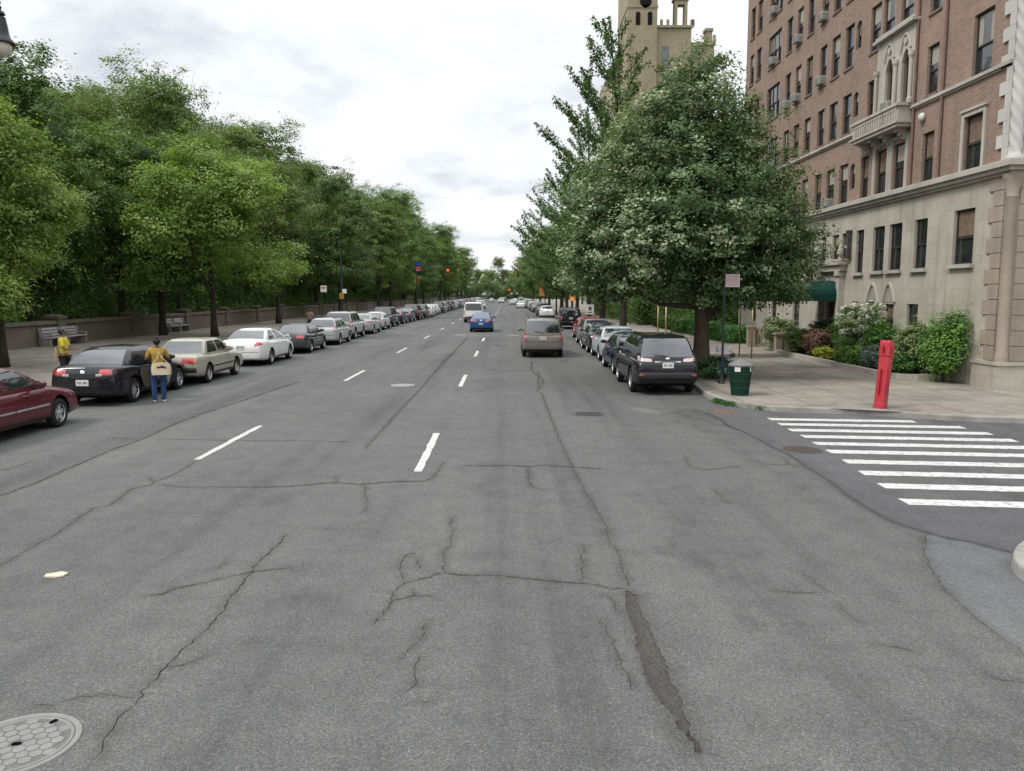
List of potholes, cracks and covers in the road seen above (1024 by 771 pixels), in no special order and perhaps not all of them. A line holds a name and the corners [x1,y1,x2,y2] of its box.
manhole cover [781,446,823,454]
crack [49,535,285,757]
crack [4,462,444,563]
crack [923,537,1023,653]
manhole cover [0,713,83,771]
crack [375,366,631,703]
